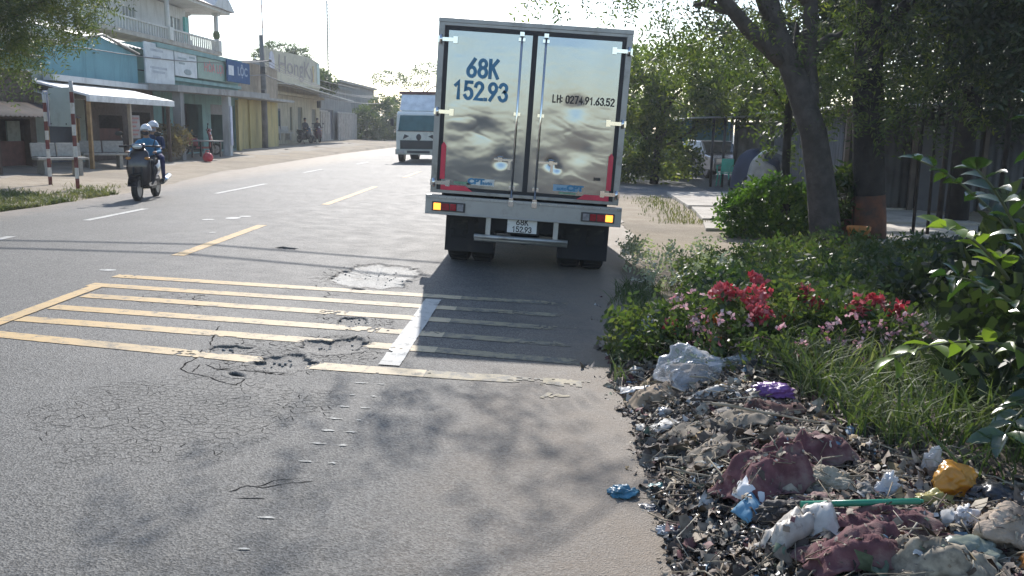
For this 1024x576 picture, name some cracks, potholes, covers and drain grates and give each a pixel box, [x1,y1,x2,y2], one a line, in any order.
crack [20,264,393,467]
pothole [240,351,327,374]
pothole [290,335,379,355]
crack [229,478,311,499]
pothole [332,316,373,328]
pothole [221,370,252,379]
